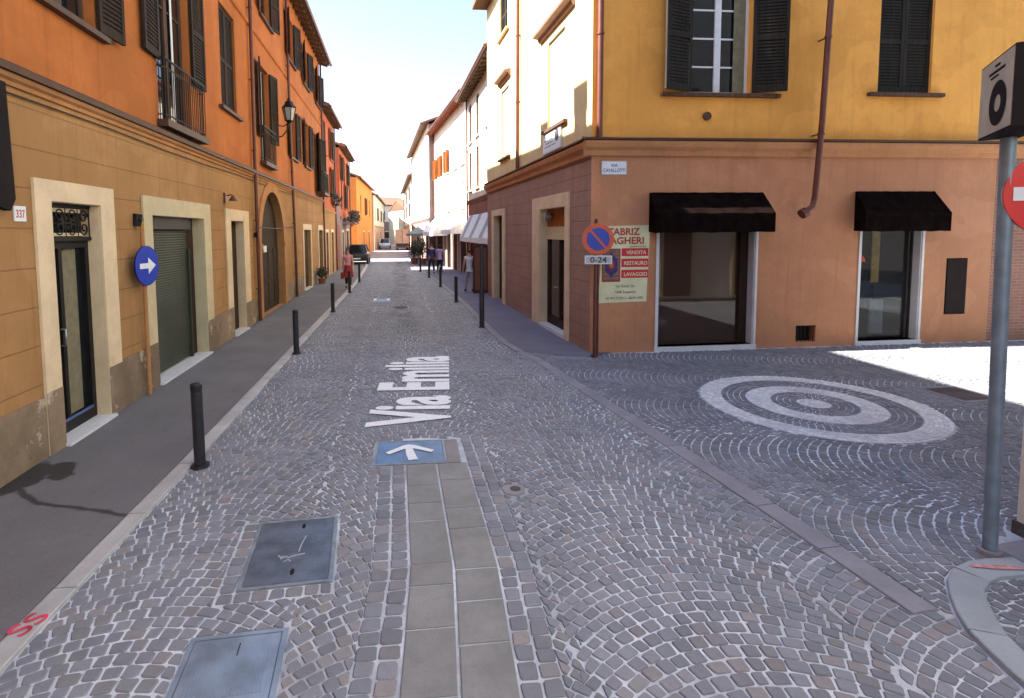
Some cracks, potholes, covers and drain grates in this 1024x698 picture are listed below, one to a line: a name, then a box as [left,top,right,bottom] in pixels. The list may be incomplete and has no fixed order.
manhole cover [236,515,338,593]
manhole cover [166,627,289,698]
manhole cover [502,484,525,496]
